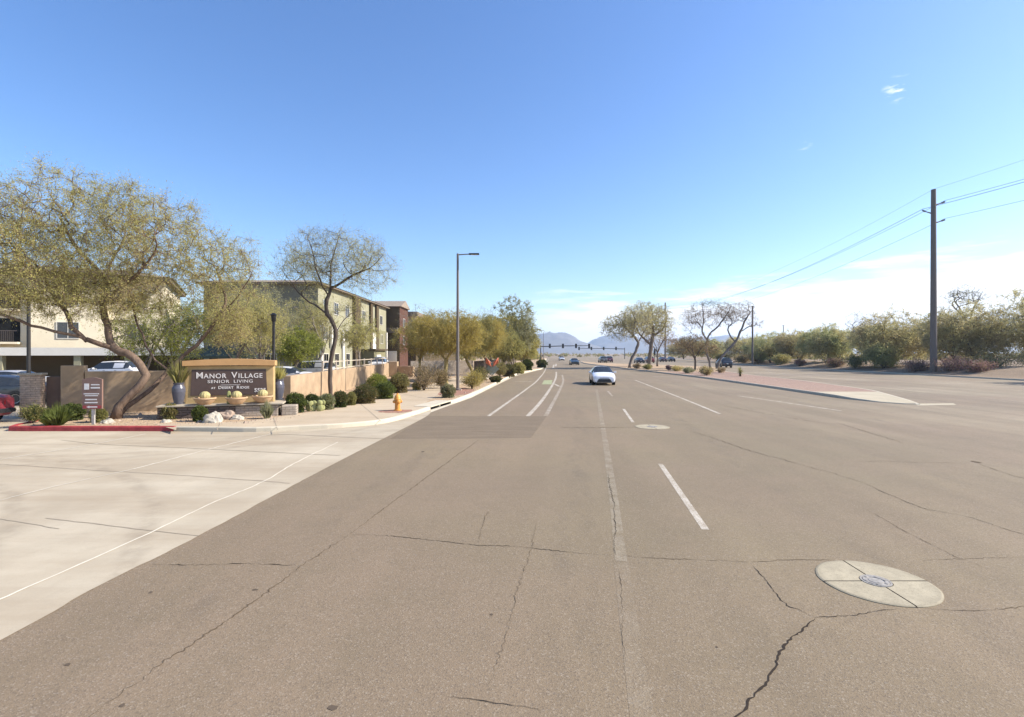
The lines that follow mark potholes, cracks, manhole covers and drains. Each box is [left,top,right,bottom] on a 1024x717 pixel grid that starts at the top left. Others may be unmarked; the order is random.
crack [350,442,582,690]
crack [608,474,892,717]
crack [864,508,1006,561]
manhole cover [815,560,944,608]
crack [90,536,346,716]
